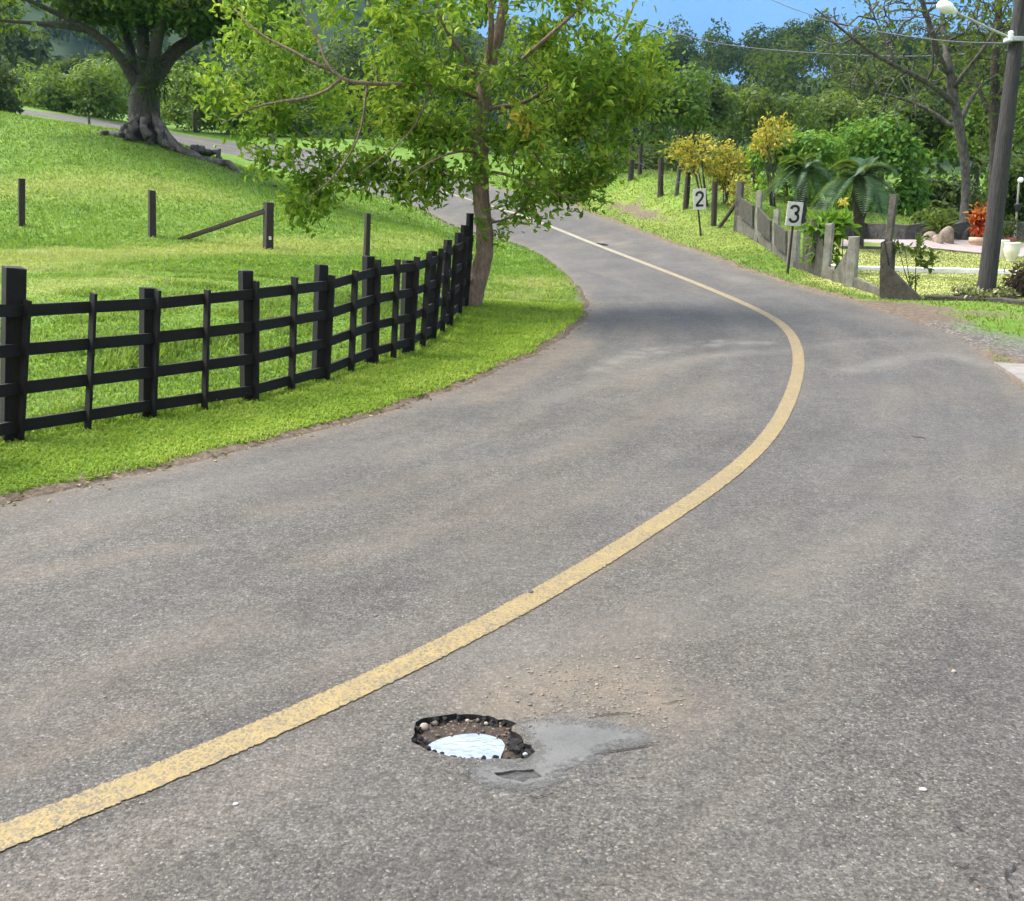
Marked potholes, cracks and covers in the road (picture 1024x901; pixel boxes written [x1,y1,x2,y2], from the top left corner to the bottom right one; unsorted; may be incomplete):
pothole [411,713,535,760]
crack [954,856,1022,901]
